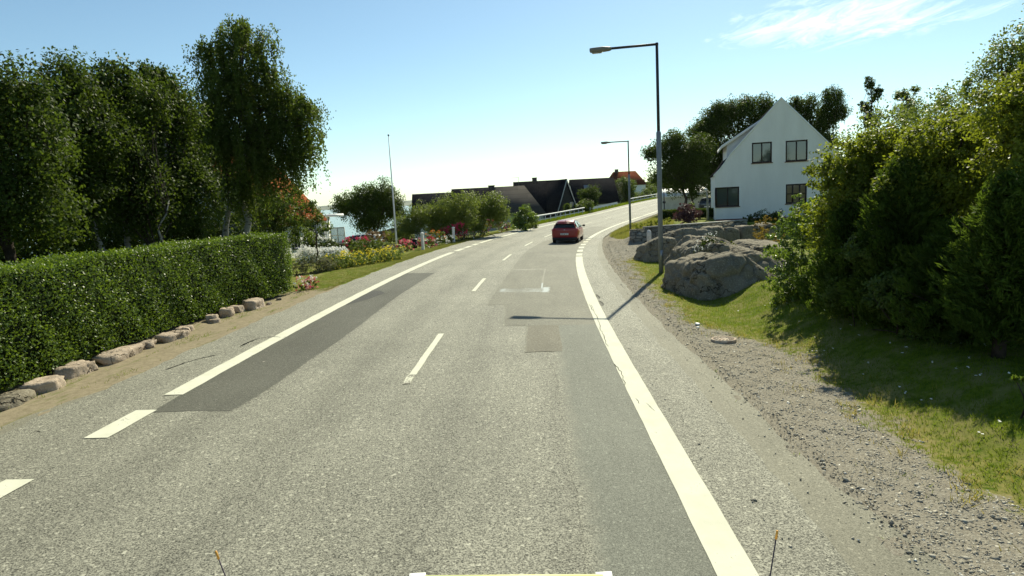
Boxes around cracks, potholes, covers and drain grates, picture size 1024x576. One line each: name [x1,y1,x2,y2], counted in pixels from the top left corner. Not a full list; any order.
manhole cover [711,336,737,344]
